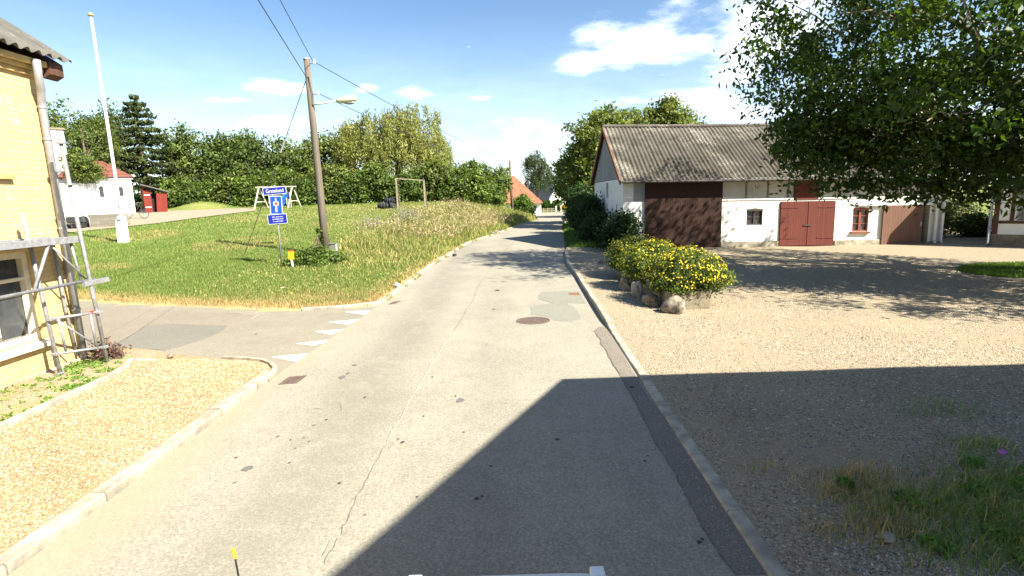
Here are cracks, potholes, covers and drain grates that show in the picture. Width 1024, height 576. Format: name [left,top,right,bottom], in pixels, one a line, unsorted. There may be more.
manhole cover [514,316,553,325]
crack [322,447,384,567]
